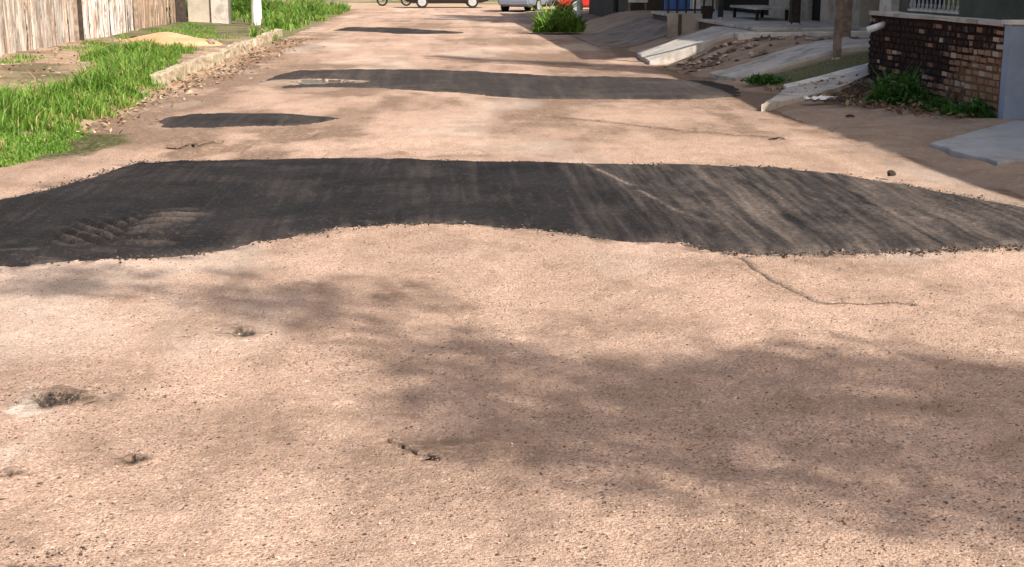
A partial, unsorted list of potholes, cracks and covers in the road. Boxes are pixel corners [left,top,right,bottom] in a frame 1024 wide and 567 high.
crack [727,257,909,307]
pothole [15,384,99,413]
pothole [0,466,33,481]
pothole [113,453,157,468]
